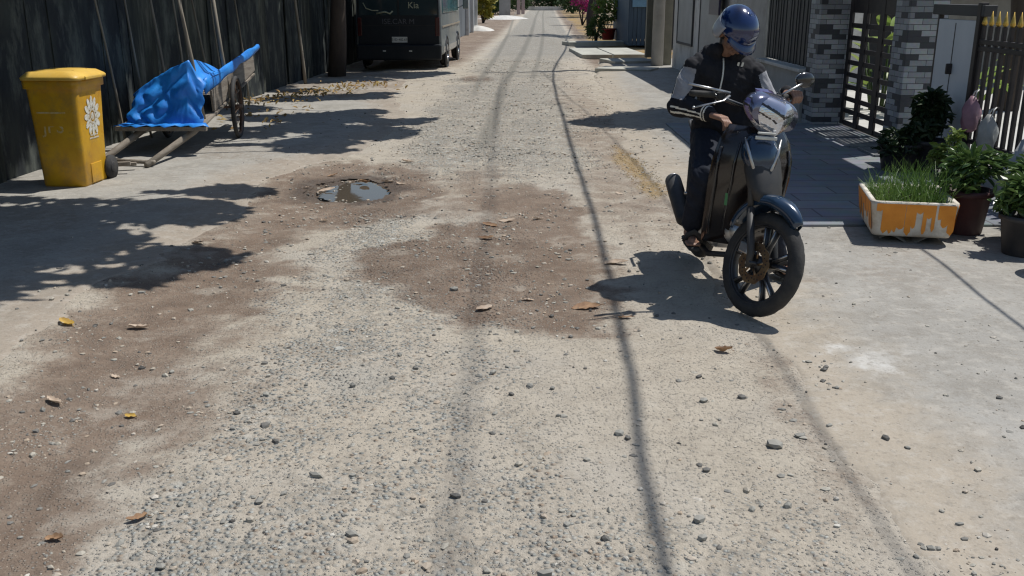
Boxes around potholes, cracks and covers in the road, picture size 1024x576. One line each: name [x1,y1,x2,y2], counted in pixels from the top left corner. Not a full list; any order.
pothole [288,175,406,206]
